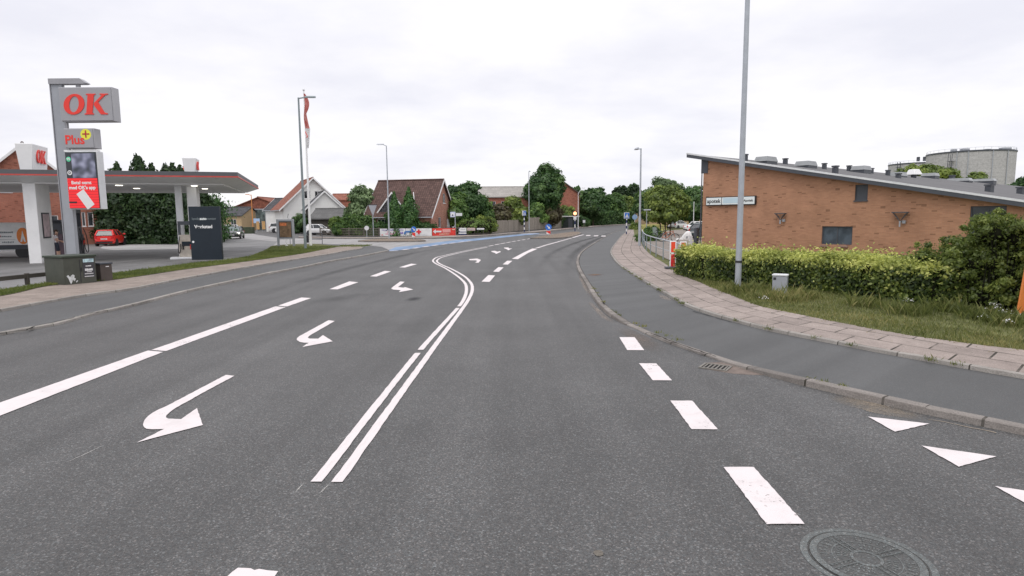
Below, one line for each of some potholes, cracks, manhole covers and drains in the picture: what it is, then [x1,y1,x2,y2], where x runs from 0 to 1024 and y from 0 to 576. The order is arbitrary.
drain grate [698,363,733,372]
manhole cover [800,528,940,576]
